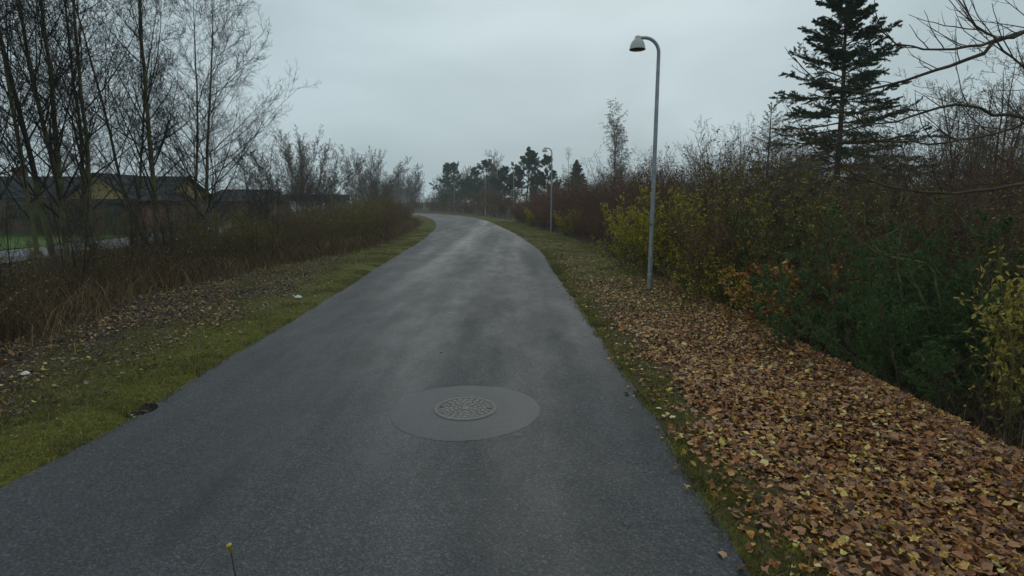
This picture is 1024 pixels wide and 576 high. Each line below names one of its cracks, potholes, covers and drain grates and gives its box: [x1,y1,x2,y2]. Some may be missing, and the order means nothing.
manhole cover [434,397,497,421]
